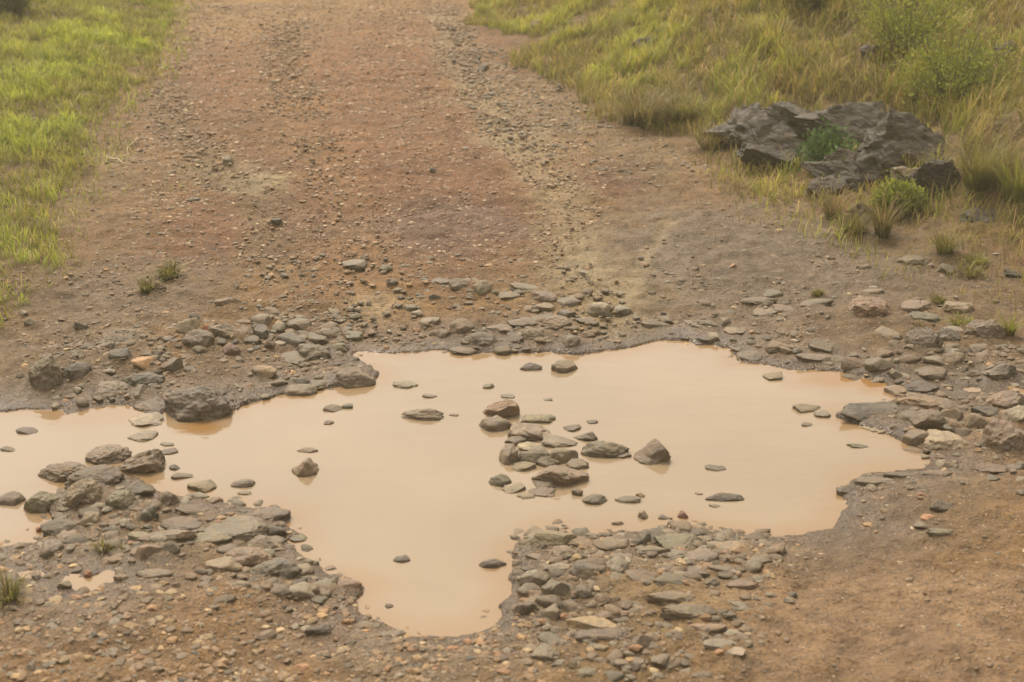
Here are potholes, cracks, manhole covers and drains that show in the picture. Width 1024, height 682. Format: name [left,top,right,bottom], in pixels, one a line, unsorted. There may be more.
pothole [0,332,950,646]
